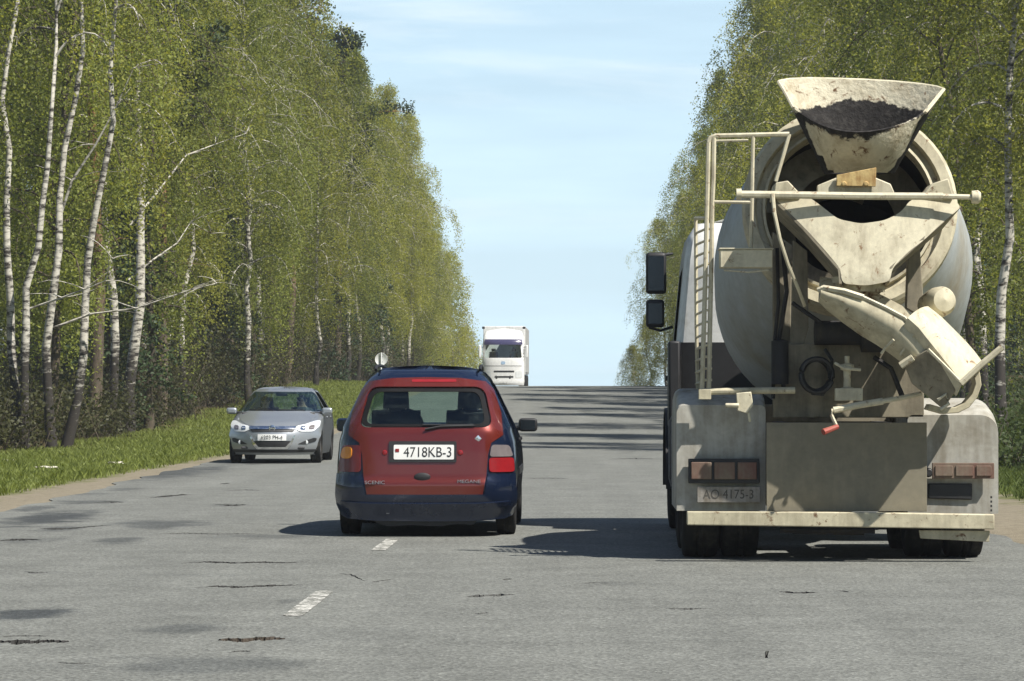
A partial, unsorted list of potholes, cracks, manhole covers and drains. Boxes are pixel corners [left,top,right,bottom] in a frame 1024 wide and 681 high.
crack [1,525,105,541]
crack [467,579,515,614]
